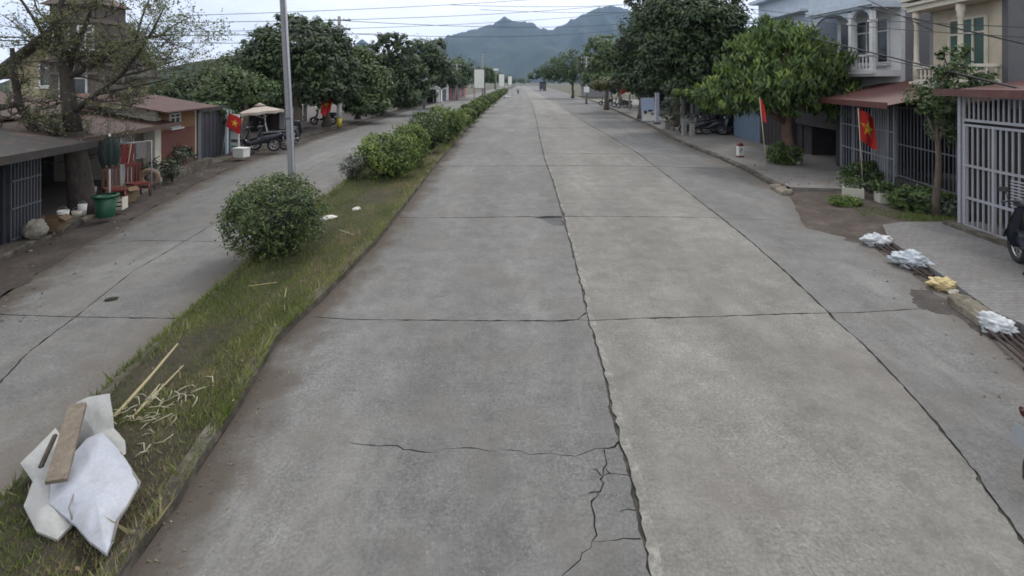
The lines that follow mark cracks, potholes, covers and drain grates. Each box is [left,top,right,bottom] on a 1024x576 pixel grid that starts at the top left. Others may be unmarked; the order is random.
drain grate [874,243,935,279]
crack [349,104,651,576]
